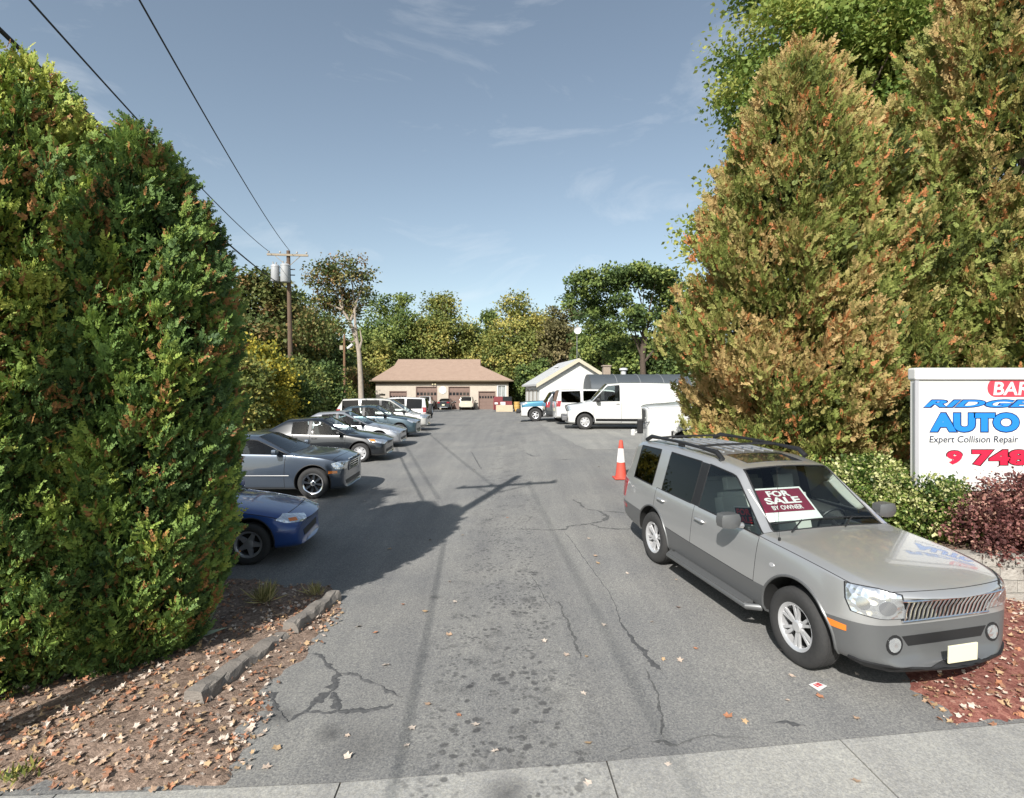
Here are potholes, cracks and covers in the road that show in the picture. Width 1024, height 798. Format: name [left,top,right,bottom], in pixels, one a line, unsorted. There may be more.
crack [524,499,746,753]
